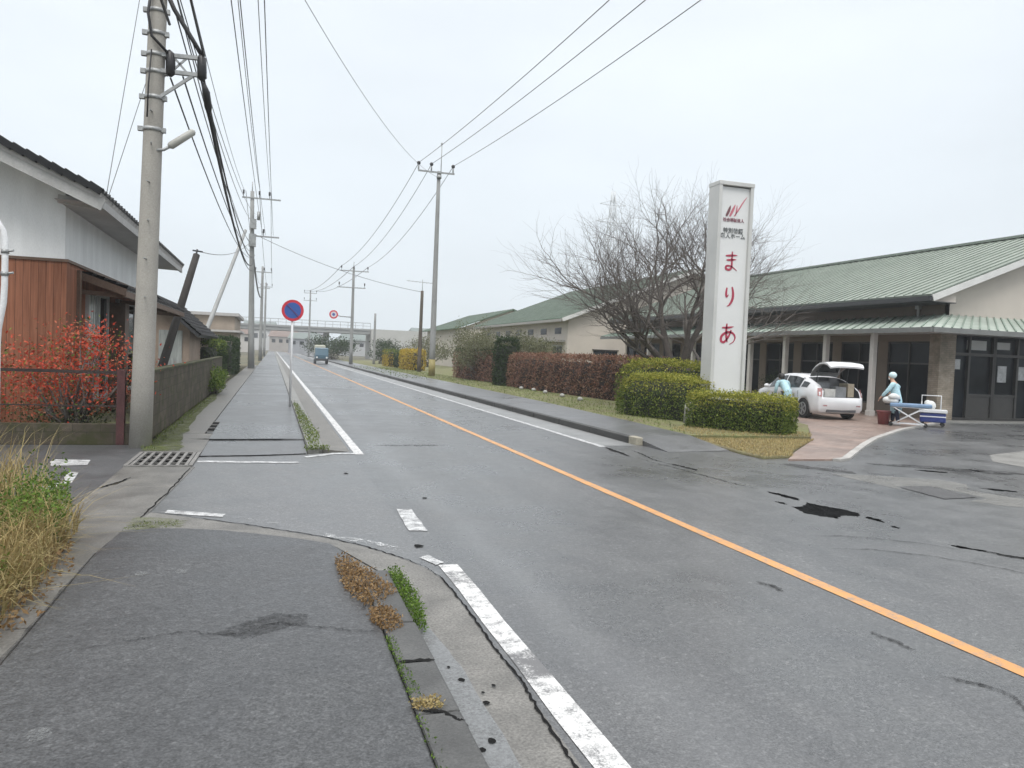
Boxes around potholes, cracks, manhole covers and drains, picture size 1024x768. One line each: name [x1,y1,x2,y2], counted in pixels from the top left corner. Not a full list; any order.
crack [939,675,1024,710]
drain grate [123,451,201,467]
pothole [794,502,860,519]
crack [606,447,749,487]
crack [835,535,1024,572]
